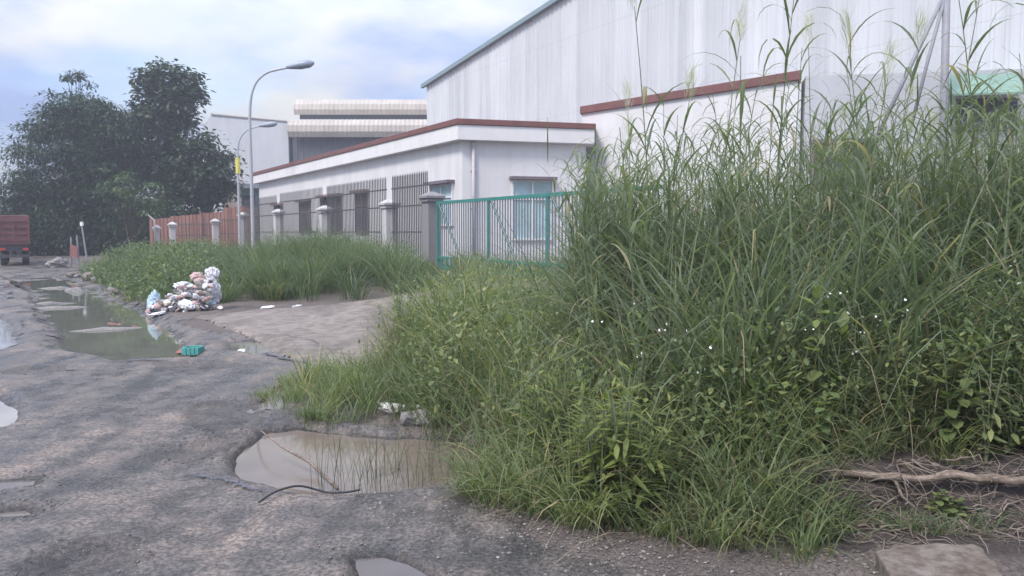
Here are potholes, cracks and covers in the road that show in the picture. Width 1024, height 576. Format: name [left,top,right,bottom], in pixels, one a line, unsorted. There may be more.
pothole [0,475,47,490]
pothole [216,424,515,495]
pothole [0,393,29,427]
pothole [0,500,45,519]
pothole [339,547,448,576]
pothole [2,275,215,362]
